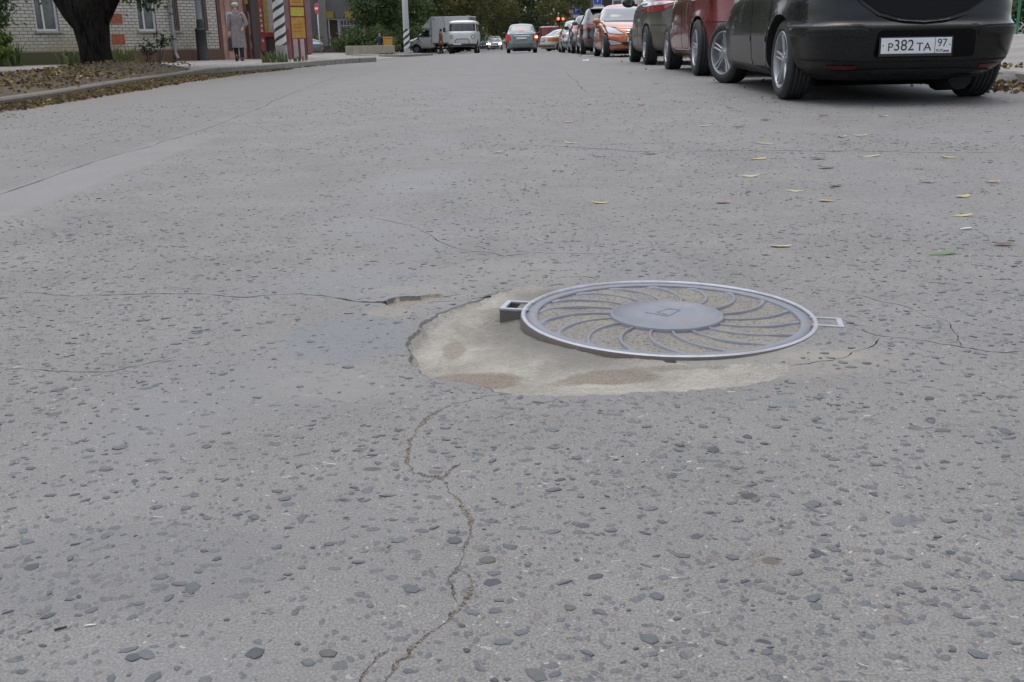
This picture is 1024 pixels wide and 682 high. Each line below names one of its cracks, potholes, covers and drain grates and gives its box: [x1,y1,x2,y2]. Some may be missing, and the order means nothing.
manhole cover [499,280,845,363]
crack [28,357,173,372]
crack [9,291,387,305]
crack [359,394,501,682]
crack [791,286,1017,366]
pothole [381,294,443,308]
crack [375,218,633,256]
